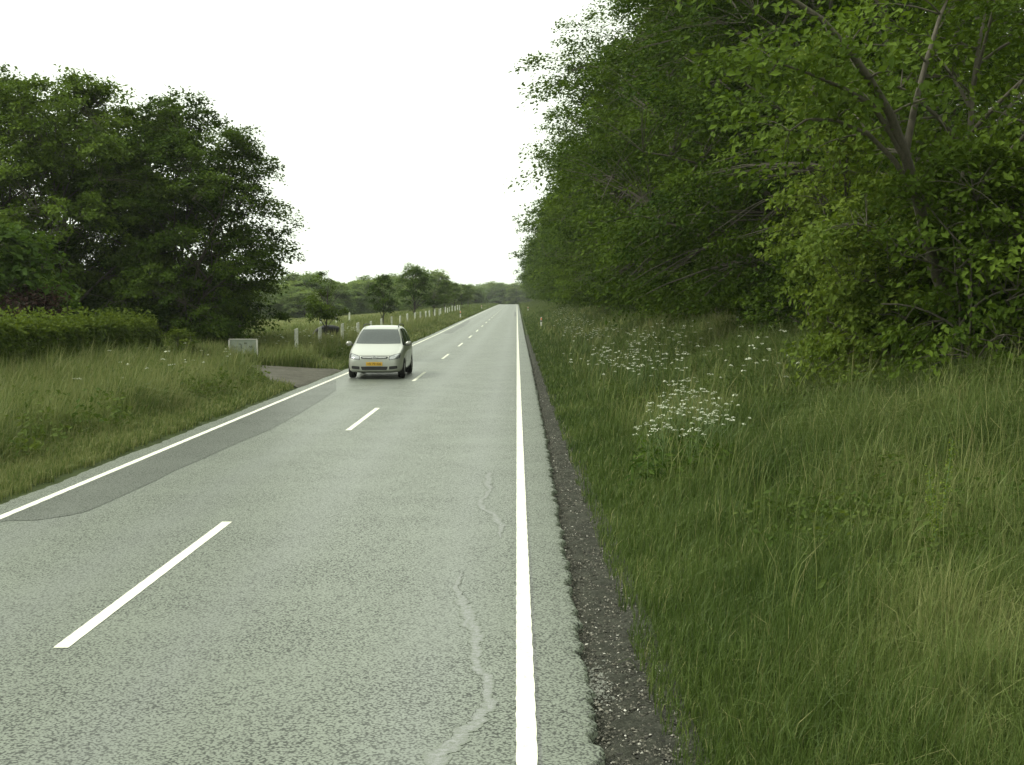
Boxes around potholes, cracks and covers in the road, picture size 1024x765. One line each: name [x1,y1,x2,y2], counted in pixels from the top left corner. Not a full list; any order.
crack [476,472,507,538]
crack [421,571,500,765]
